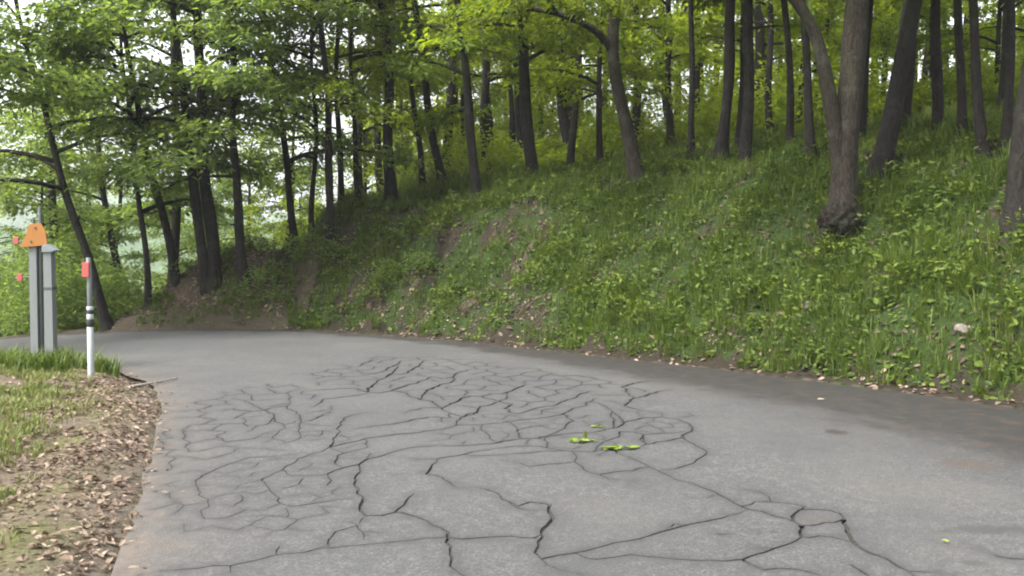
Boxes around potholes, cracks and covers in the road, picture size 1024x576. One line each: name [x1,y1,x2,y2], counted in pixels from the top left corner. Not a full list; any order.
crack [159,357,932,576]
